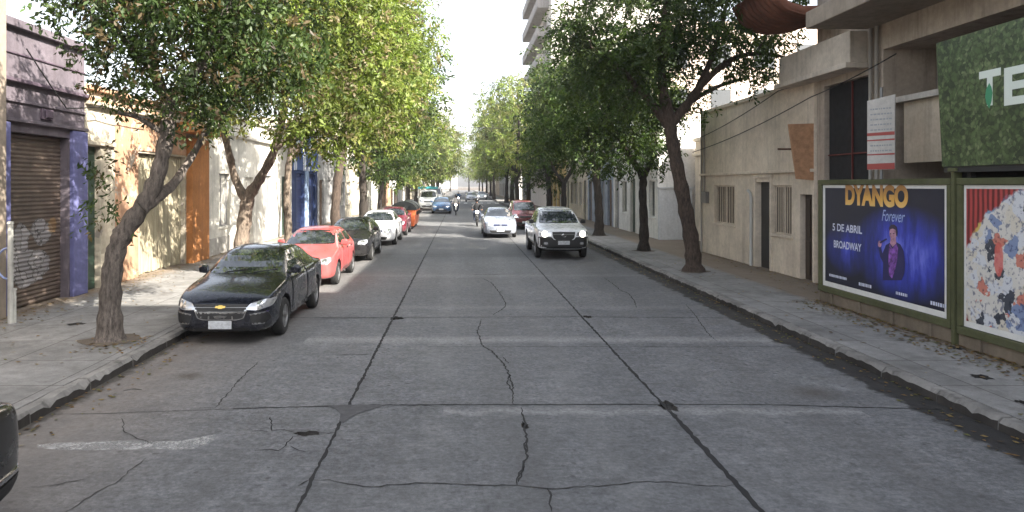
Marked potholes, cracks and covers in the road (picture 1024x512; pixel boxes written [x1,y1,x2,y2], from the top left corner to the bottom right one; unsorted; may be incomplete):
crack [215,363,257,408]
pothole [657,400,679,412]
crack [326,274,735,511]
crack [40,462,142,512]
